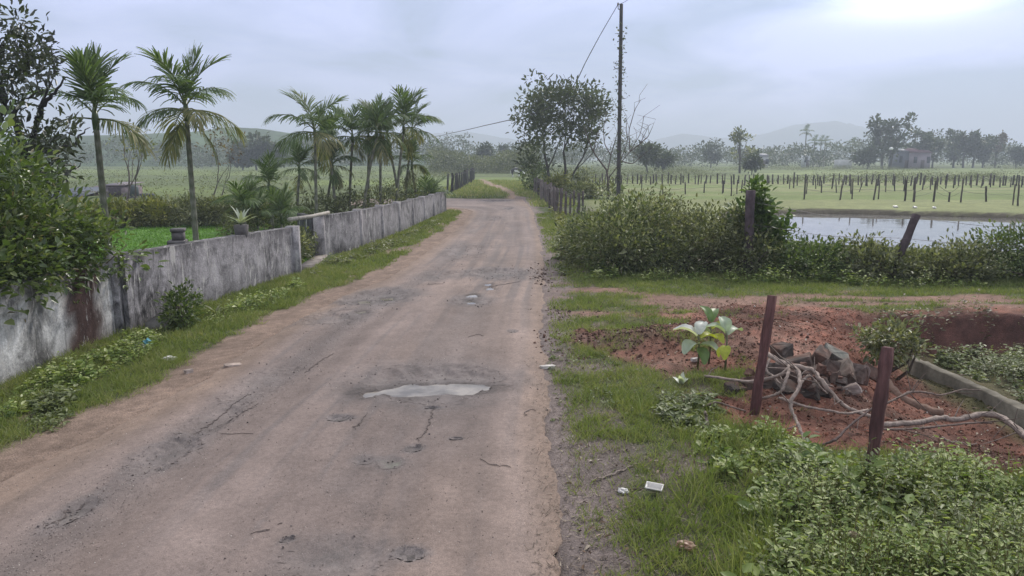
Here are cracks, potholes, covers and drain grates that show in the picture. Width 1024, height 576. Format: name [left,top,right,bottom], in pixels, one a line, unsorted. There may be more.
pothole [392,546,426,562]
pothole [43,495,101,529]
crack [193,394,257,435]
pothole [339,363,515,409]
pothole [375,456,407,469]
pothole [119,435,204,477]
pothole [450,295,497,306]
